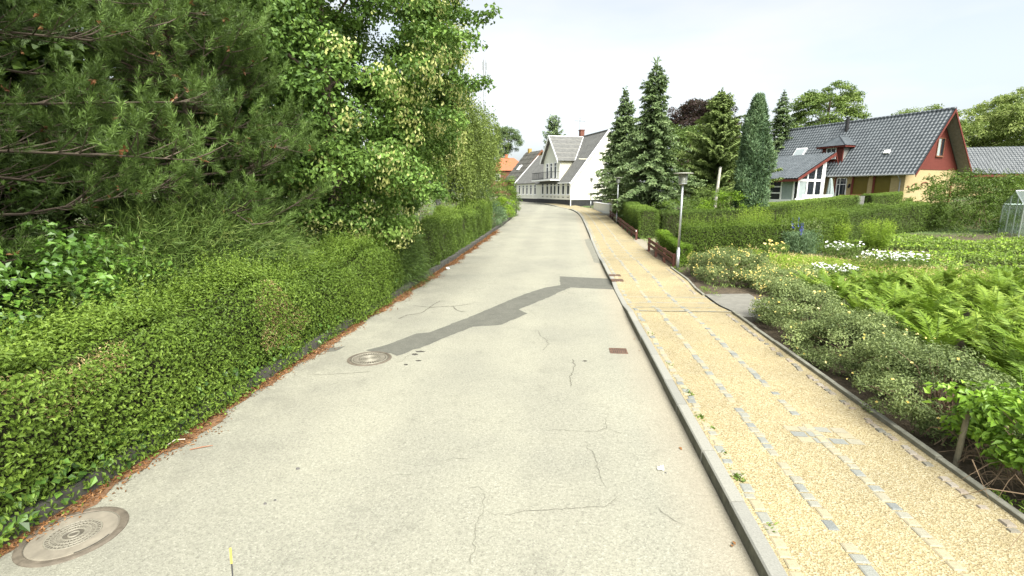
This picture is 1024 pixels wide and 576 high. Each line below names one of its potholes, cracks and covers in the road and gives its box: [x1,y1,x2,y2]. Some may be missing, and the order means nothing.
manhole cover [12,506,129,568]
manhole cover [347,351,392,366]
crack [470,449,616,563]
